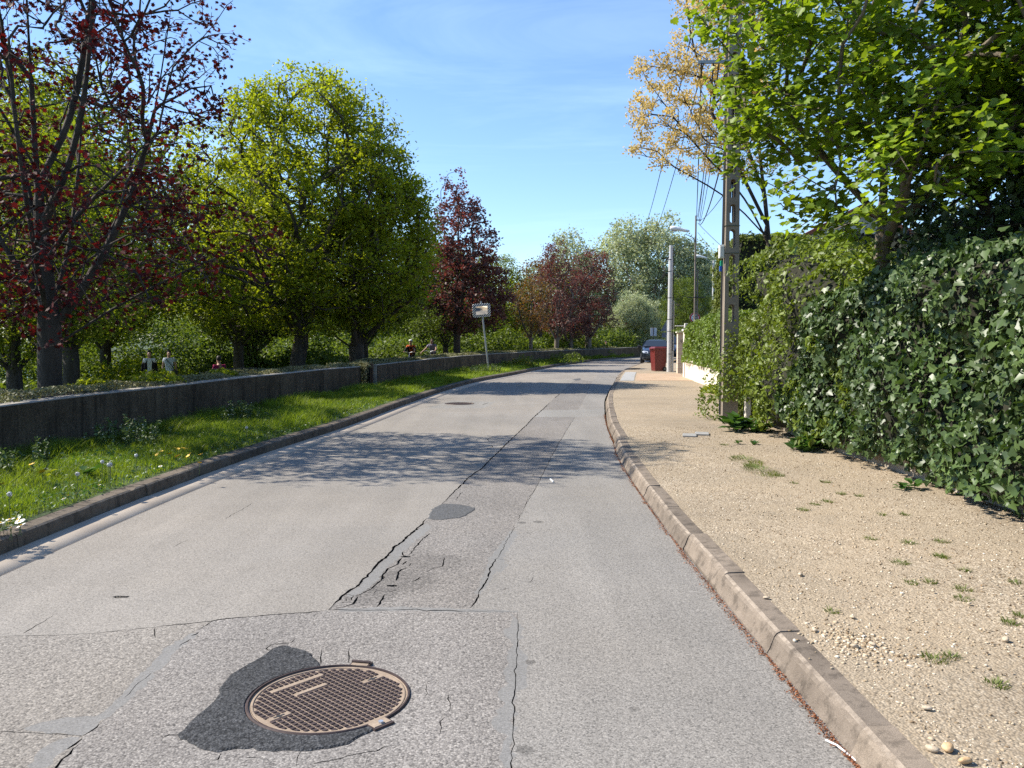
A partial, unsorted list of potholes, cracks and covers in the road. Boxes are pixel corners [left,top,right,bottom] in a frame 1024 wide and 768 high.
manhole cover [245,659,411,735]
crack [0,380,576,768]
